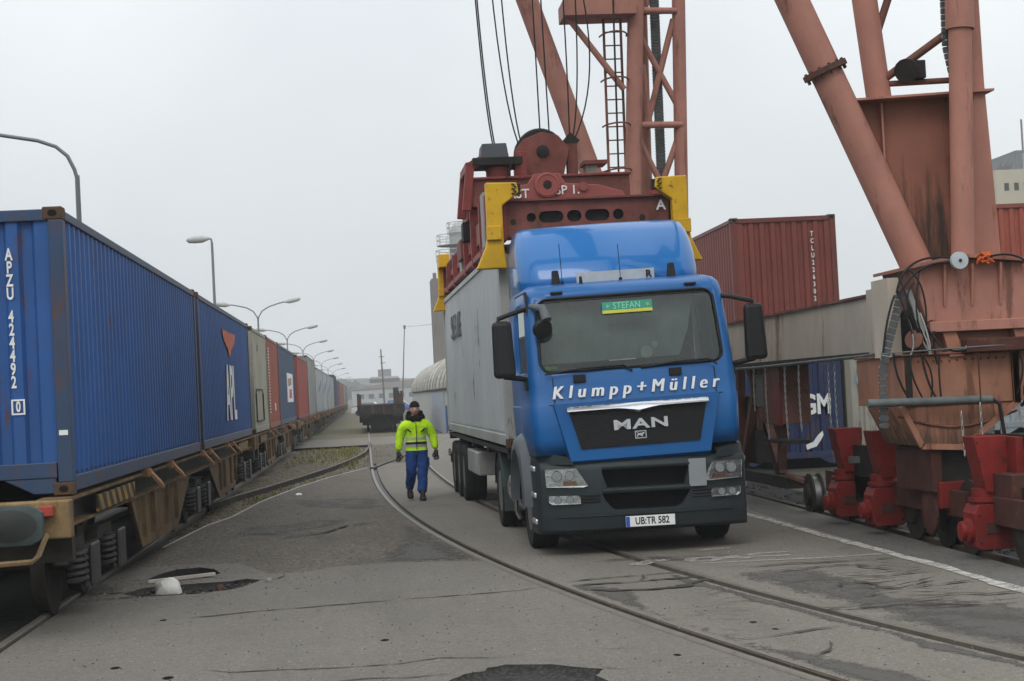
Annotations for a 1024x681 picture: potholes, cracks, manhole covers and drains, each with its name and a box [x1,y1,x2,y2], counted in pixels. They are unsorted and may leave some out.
pothole [146,567,219,581]
crack [186,600,387,618]
crack [566,545,1024,655]
pothole [125,579,260,597]
crack [224,521,377,538]
